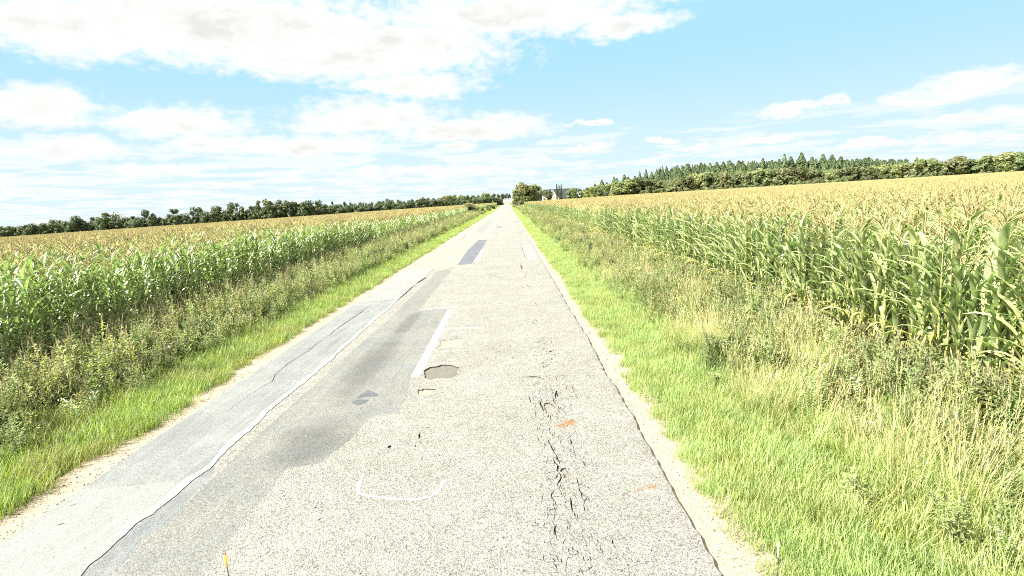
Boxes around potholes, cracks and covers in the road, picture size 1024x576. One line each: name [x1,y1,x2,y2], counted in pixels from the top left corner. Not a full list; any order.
pothole [424,365,459,380]
crack [231,277,427,409]
crack [515,265,601,576]
